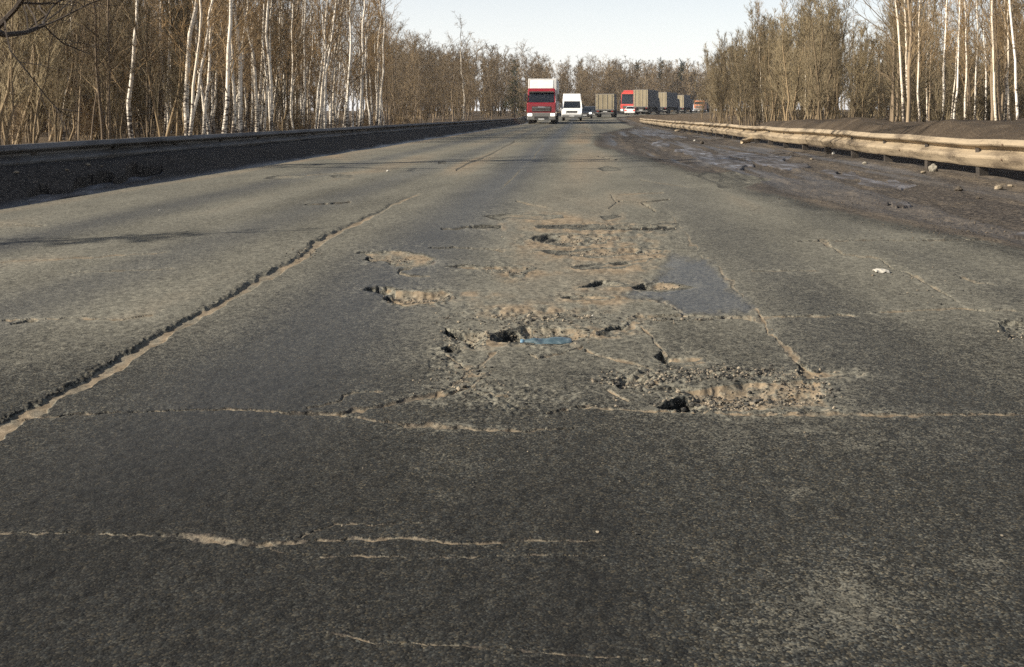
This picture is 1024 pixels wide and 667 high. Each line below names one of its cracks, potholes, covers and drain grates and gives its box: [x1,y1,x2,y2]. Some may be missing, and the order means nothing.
crack [5,315,147,325]
pothole [532,233,612,247]
pothole [442,344,461,354]
pothole [535,246,666,259]
crack [530,180,1024,371]
crack [325,632,661,662]
pothole [632,282,698,293]
pothole [654,353,708,367]
pothole [364,286,453,308]
pothole [490,325,594,348]
